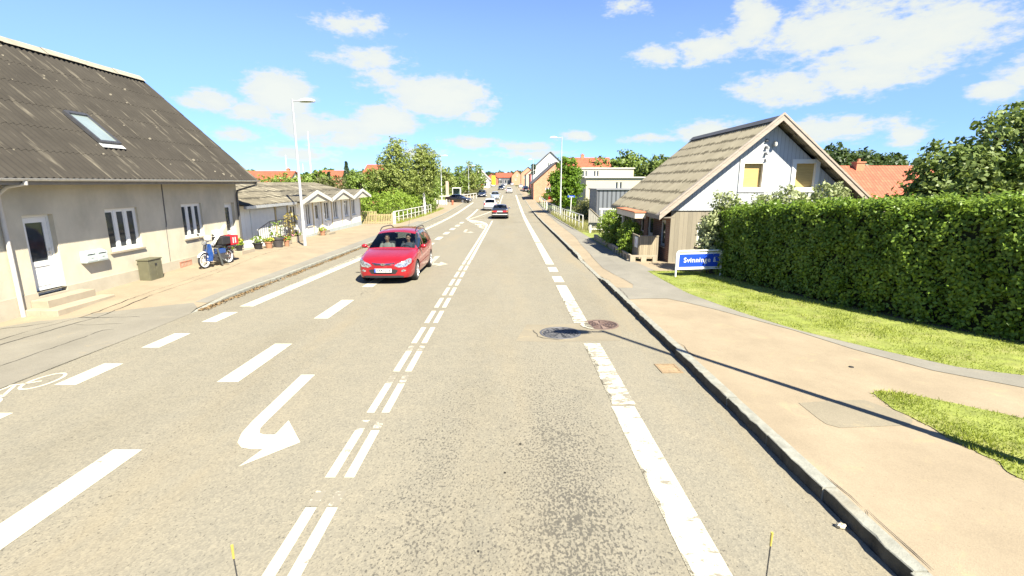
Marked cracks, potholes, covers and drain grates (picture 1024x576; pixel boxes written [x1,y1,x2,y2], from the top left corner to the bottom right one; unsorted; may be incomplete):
manhole cover [540,327,581,339]
manhole cover [584,320,619,330]
